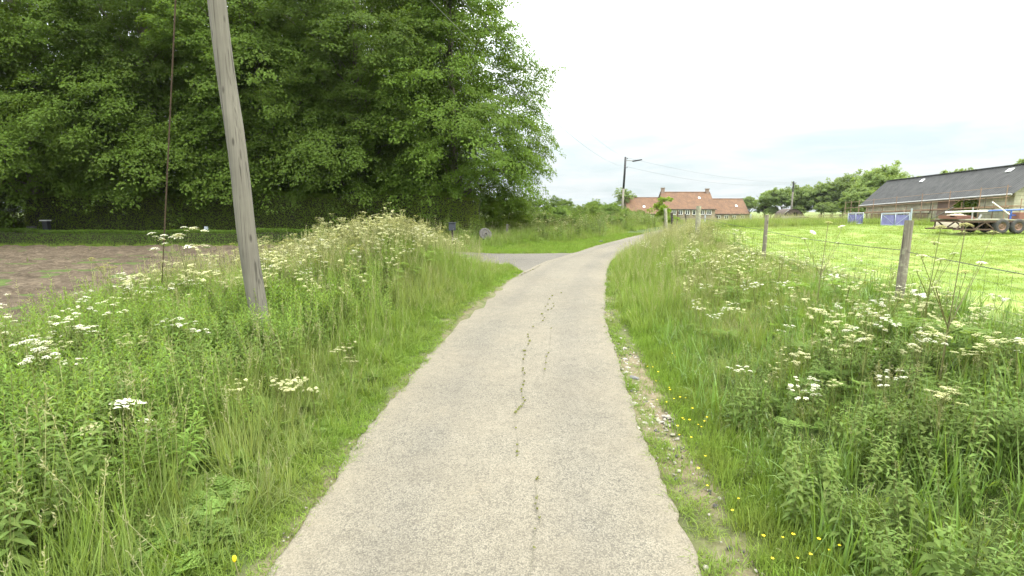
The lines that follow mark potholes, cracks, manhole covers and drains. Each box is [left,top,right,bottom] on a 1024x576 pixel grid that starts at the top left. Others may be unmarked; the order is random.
crack [514,292,562,456]
crack [530,476,541,576]
